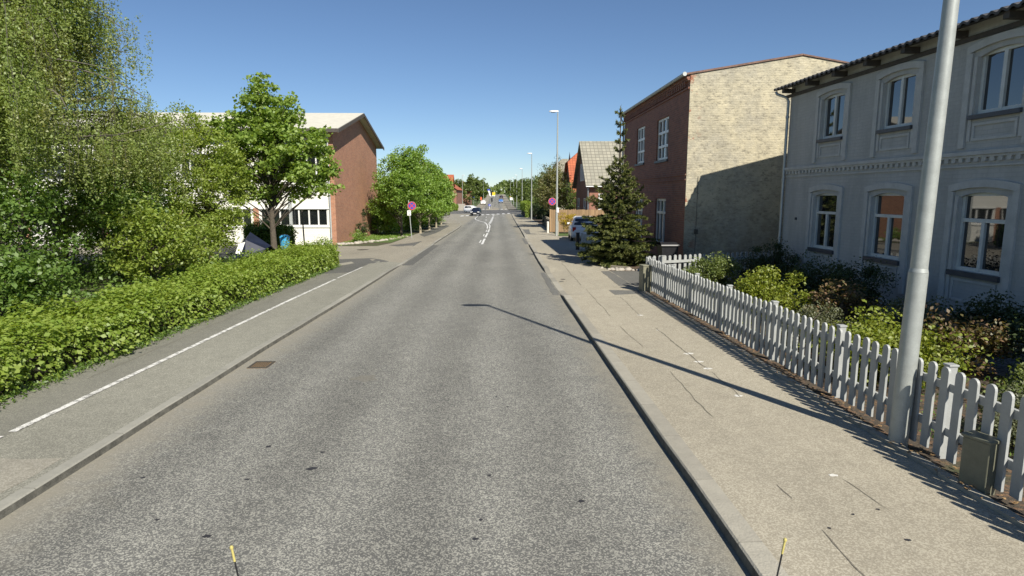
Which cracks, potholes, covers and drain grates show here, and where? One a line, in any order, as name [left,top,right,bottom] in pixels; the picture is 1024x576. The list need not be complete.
crack [824,532,865,576]
